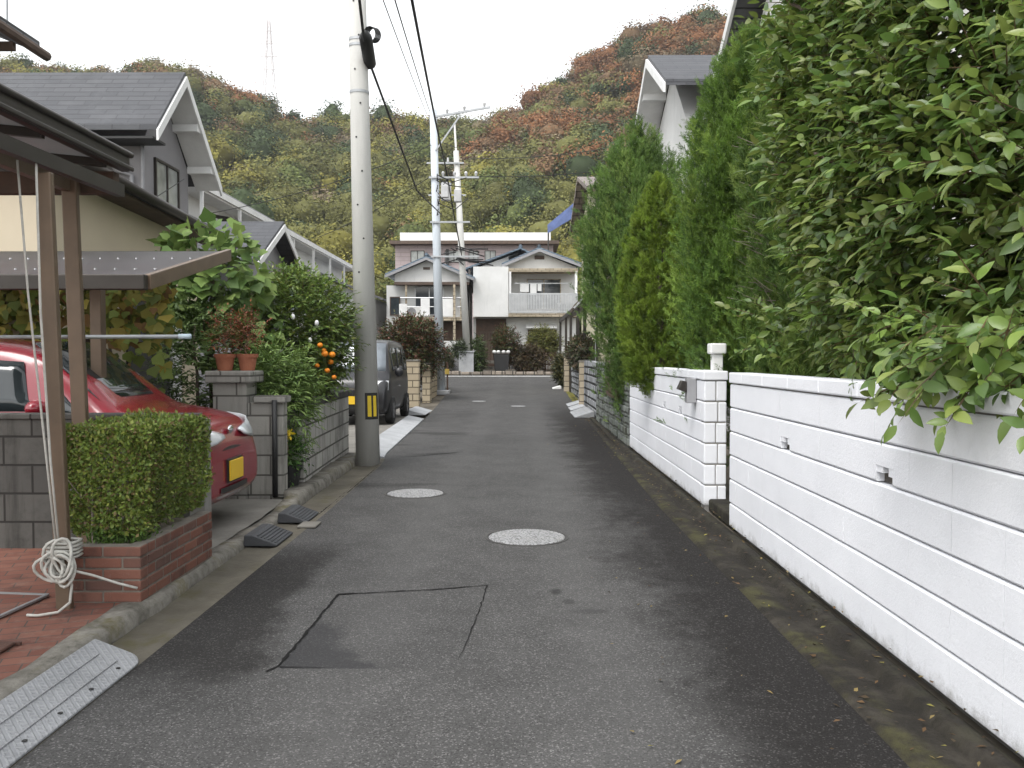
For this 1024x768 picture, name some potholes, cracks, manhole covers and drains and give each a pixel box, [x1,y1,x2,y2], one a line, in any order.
manhole cover [384,488,446,498]
manhole cover [485,528,569,546]
